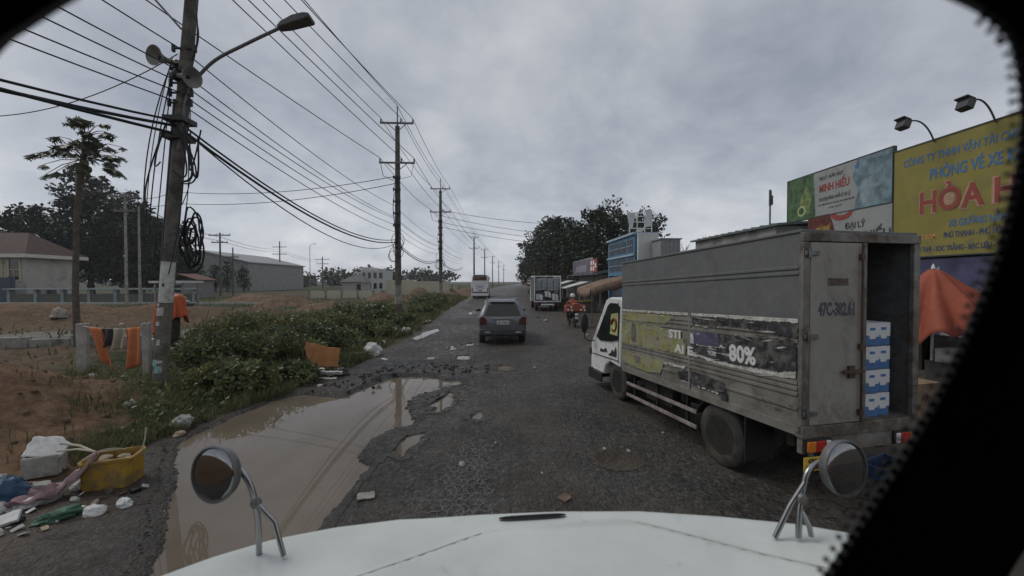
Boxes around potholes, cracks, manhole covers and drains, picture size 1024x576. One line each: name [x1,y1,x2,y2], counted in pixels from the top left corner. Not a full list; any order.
pothole [124,371,469,576]
